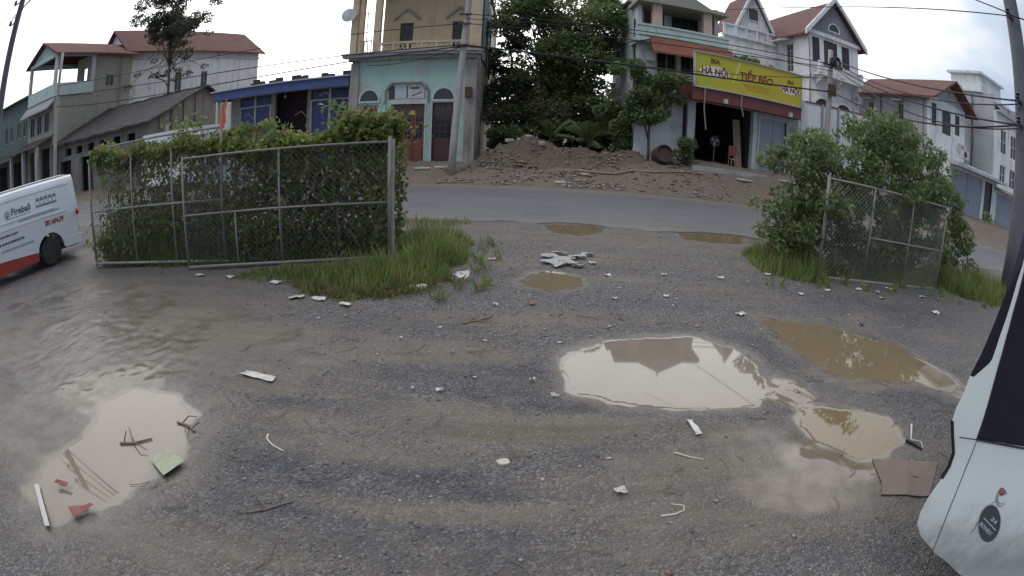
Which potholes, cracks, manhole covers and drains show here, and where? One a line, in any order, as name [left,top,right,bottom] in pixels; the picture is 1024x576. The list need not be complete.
pothole [778,391,920,471]
pothole [676,233,755,245]
pothole [510,267,598,294]
pothole [743,311,967,403]
pothole [12,379,215,534]
pothole [543,223,606,236]
pothole [539,327,791,421]
